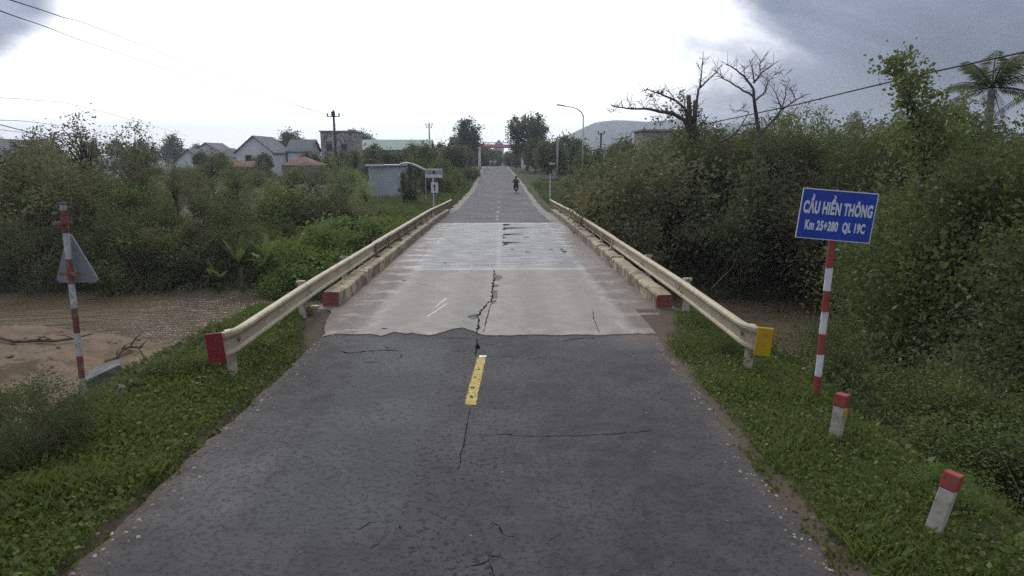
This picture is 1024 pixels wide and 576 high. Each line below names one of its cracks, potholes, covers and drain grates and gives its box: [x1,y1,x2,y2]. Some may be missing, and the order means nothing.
crack [340,346,402,363]
crack [462,556,506,575]
crack [455,408,651,472]
crack [443,270,496,356]
